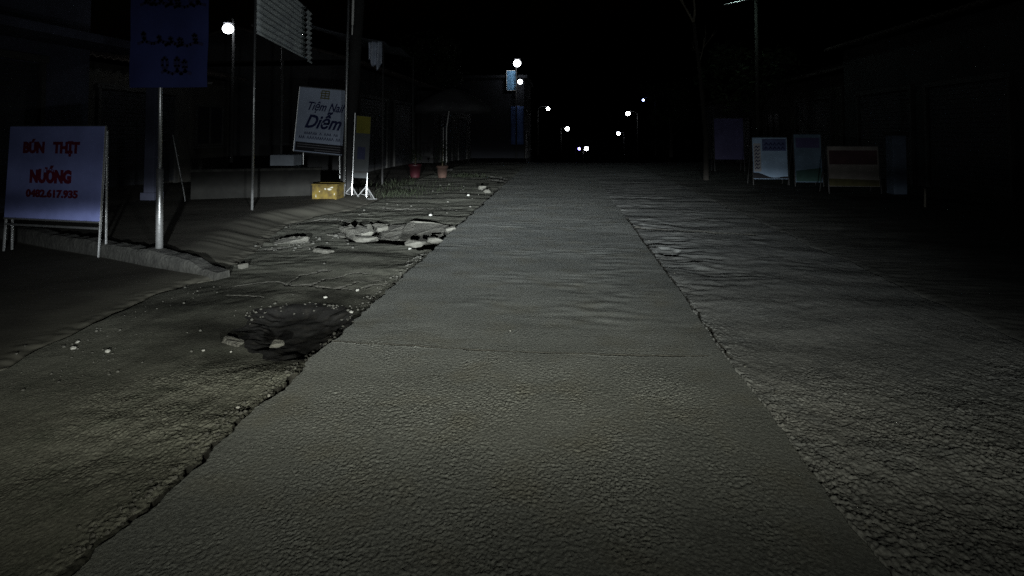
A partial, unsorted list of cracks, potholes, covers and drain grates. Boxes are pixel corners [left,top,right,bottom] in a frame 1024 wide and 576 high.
crack [80,366,305,567]
pothole [232,303,354,362]
crack [227,258,424,306]
